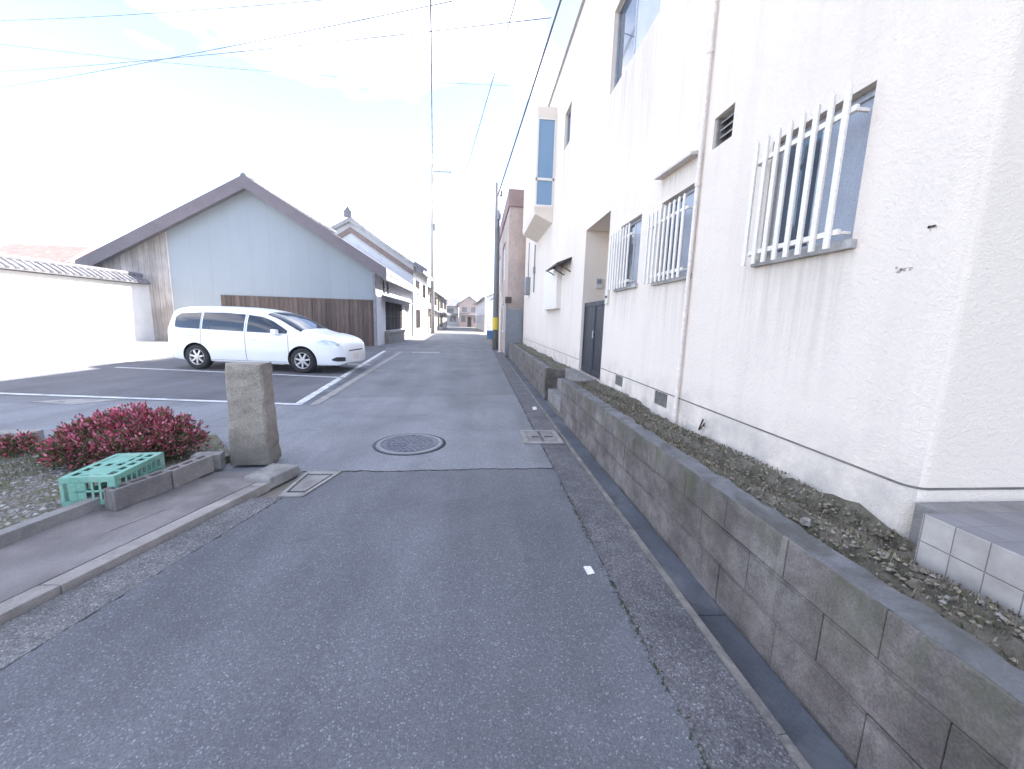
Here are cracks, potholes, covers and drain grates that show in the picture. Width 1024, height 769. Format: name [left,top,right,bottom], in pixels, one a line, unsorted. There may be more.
manhole cover [372,434,446,456]
